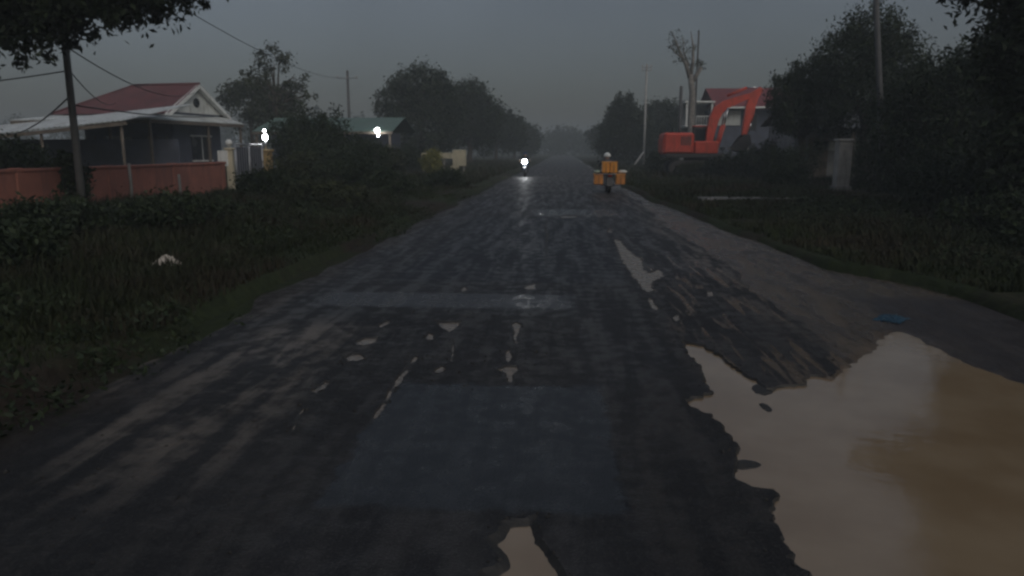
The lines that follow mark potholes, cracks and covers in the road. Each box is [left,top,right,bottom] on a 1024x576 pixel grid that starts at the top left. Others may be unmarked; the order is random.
pothole [613,238,666,294]
crack [371,352,419,420]
pothole [344,353,366,361]
pothole [496,365,519,386]
pothole [511,321,524,344]
pothole [433,320,462,332]
pothole [477,514,567,576]
pothole [680,325,1024,576]
